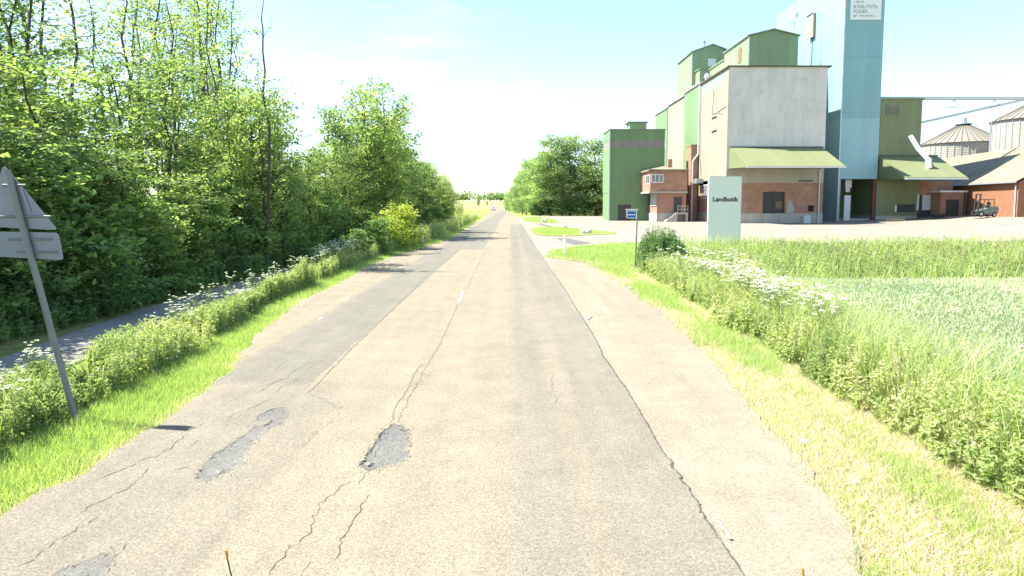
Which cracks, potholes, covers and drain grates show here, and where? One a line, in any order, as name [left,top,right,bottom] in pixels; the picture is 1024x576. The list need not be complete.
crack [391,246,487,422]
pothole [357,423,421,473]
crack [11,361,310,572]
pothole [192,406,293,484]
crack [269,472,380,575]
